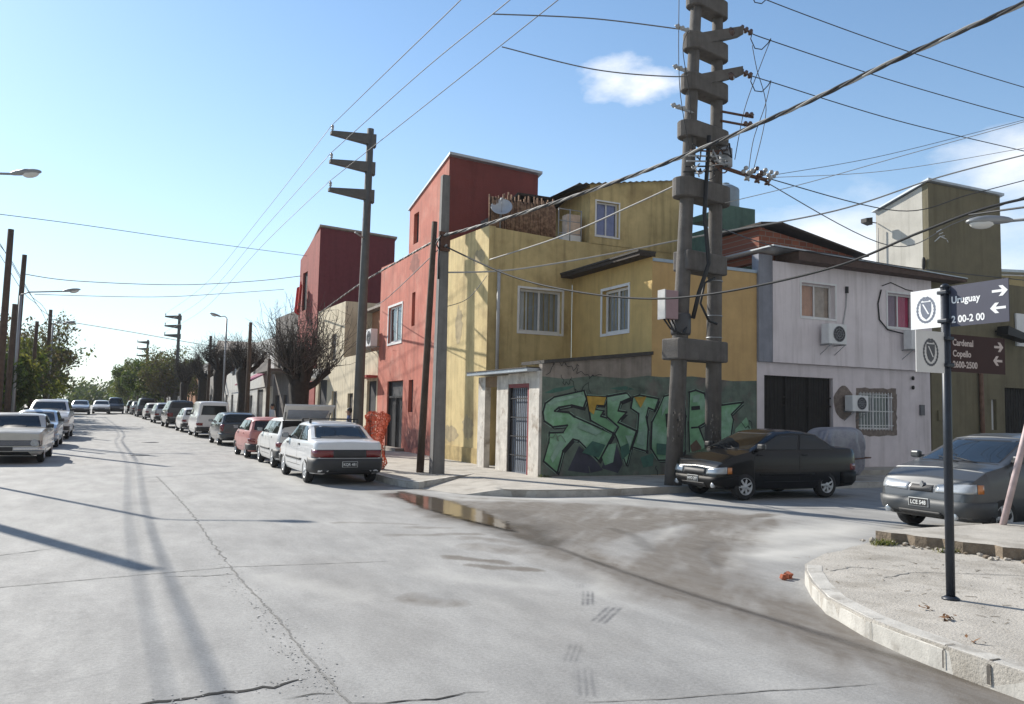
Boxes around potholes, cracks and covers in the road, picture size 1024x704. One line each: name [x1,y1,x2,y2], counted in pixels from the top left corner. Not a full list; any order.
crack [109,476,465,704]
